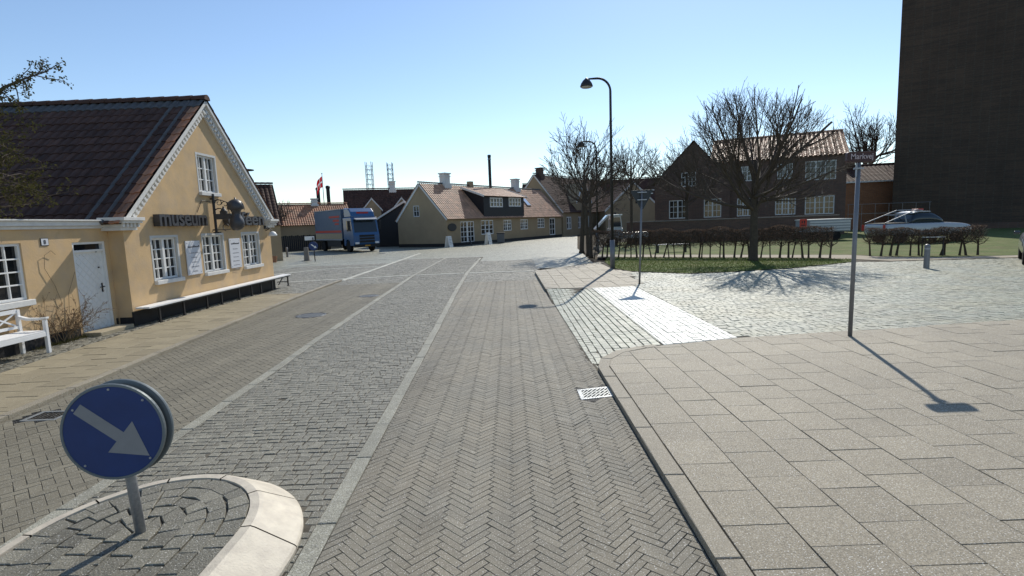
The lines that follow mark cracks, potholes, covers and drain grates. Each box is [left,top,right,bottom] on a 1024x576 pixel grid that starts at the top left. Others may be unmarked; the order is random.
drain grate [572,385,615,403]
drain grate [12,409,65,425]
